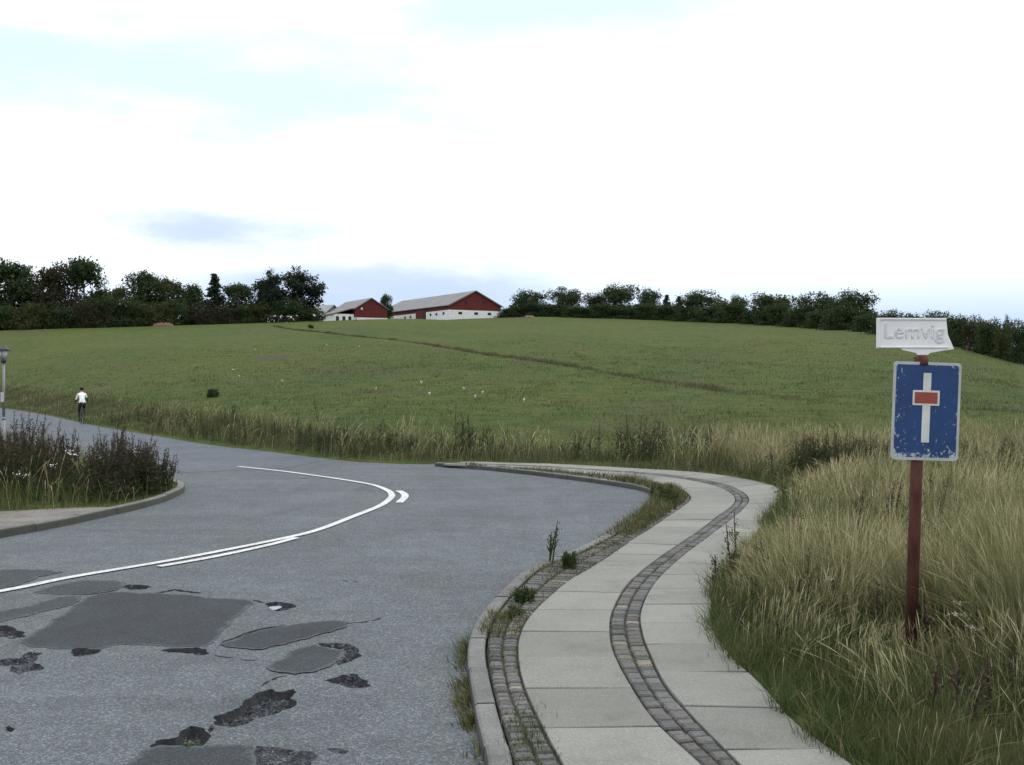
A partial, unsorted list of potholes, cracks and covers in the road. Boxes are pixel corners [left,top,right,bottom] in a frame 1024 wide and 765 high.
pothole [0,652,44,674]
pothole [150,726,211,747]
pothole [0,625,26,639]
pothole [71,648,101,657]
pothole [265,602,296,611]
pothole [325,674,371,688]
pothole [254,746,318,765]
pothole [160,647,209,655]
pothole [213,689,297,727]
